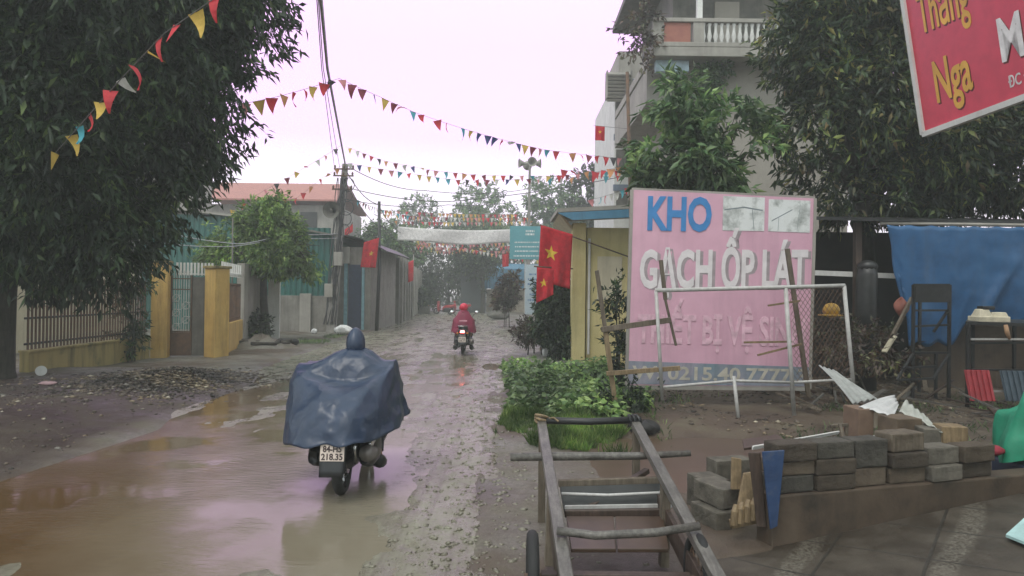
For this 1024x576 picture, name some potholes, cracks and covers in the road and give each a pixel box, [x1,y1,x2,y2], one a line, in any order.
pothole [479,362,502,371]
